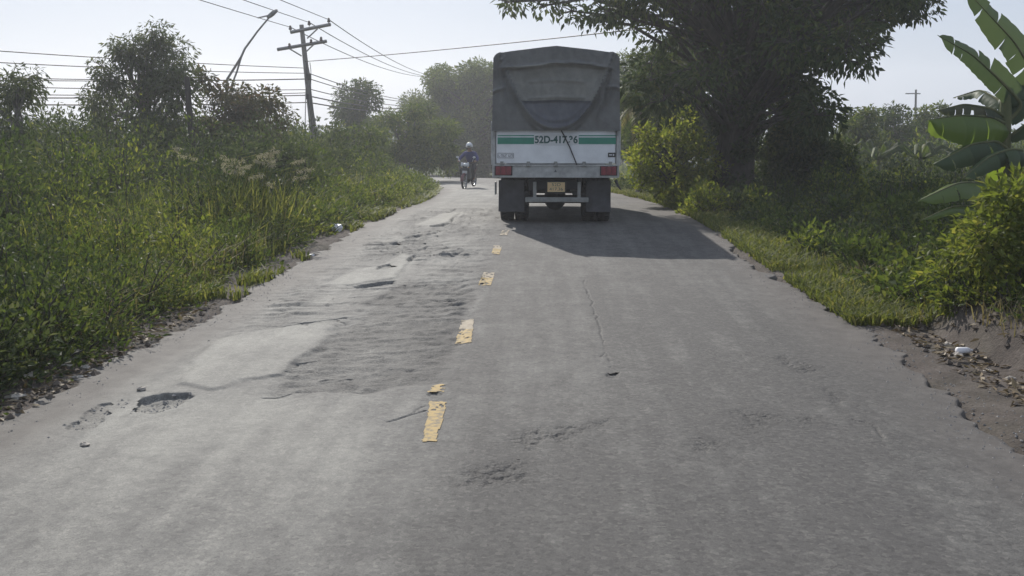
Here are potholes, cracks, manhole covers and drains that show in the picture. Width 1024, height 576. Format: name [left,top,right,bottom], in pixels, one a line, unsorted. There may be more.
pothole [362,261,411,272]
pothole [341,277,410,293]
crack [569,278,633,374]
pothole [47,396,141,438]
pothole [107,387,213,419]
